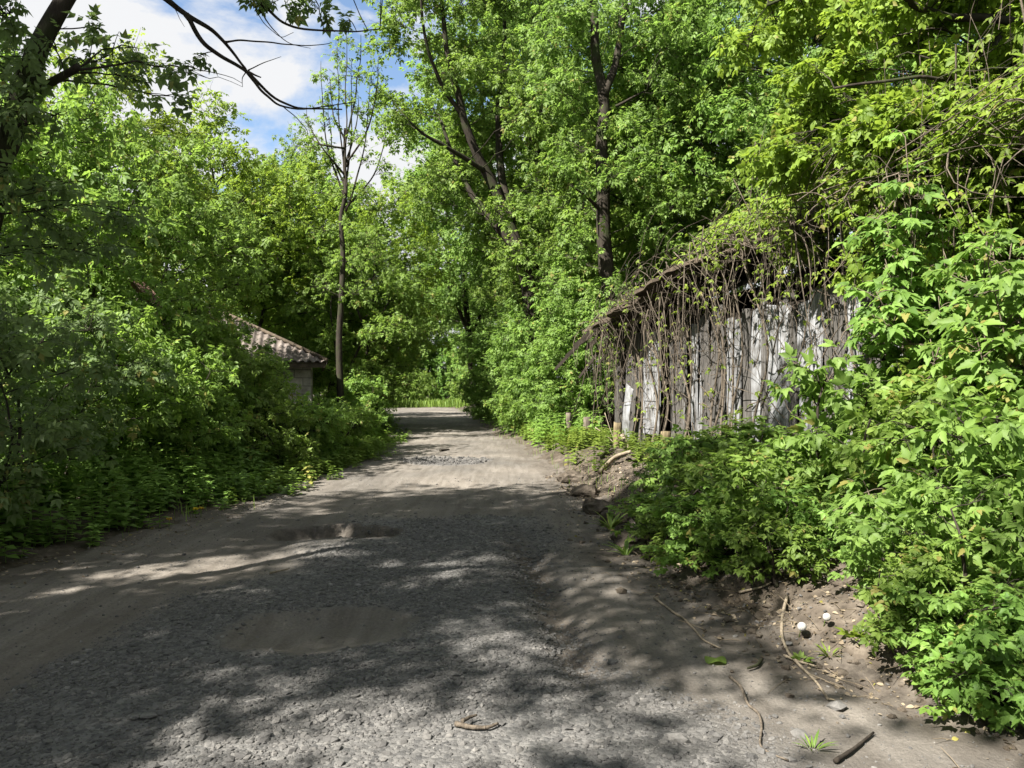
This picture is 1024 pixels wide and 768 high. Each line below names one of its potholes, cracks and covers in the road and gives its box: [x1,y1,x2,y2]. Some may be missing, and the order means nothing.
pothole [266,522,365,542]
pothole [338,525,404,539]
pothole [214,606,420,656]
